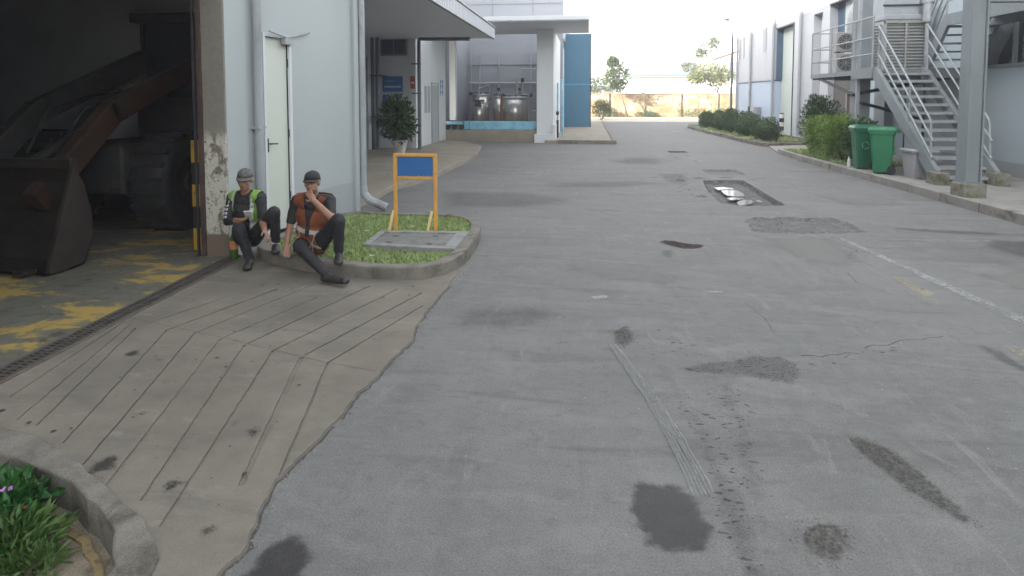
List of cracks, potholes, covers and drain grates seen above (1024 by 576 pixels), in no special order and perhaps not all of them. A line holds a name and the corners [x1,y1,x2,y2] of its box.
manhole cover [362,230,470,254]
pothole [703,180,784,206]
pothole [660,240,704,249]
crack [801,336,943,357]
